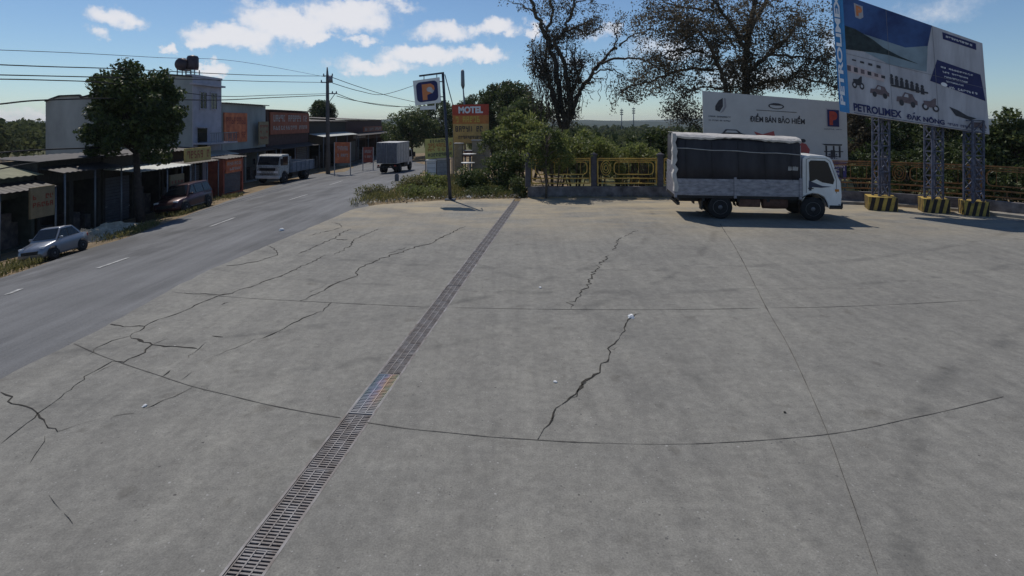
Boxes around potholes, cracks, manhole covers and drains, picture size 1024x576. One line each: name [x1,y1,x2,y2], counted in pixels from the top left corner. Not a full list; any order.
crack [1,223,463,461]
crack [566,231,634,306]
drain grate [349,374,399,415]
drain grate [421,301,450,321]
drain grate [458,261,478,272]
drain grate [467,251,485,261]
drain grate [403,320,437,345]
drain grate [448,272,470,286]
drain grate [246,468,334,551]
crack [538,312,641,439]
drain grate [223,548,278,576]
drain grate [379,344,420,375]
